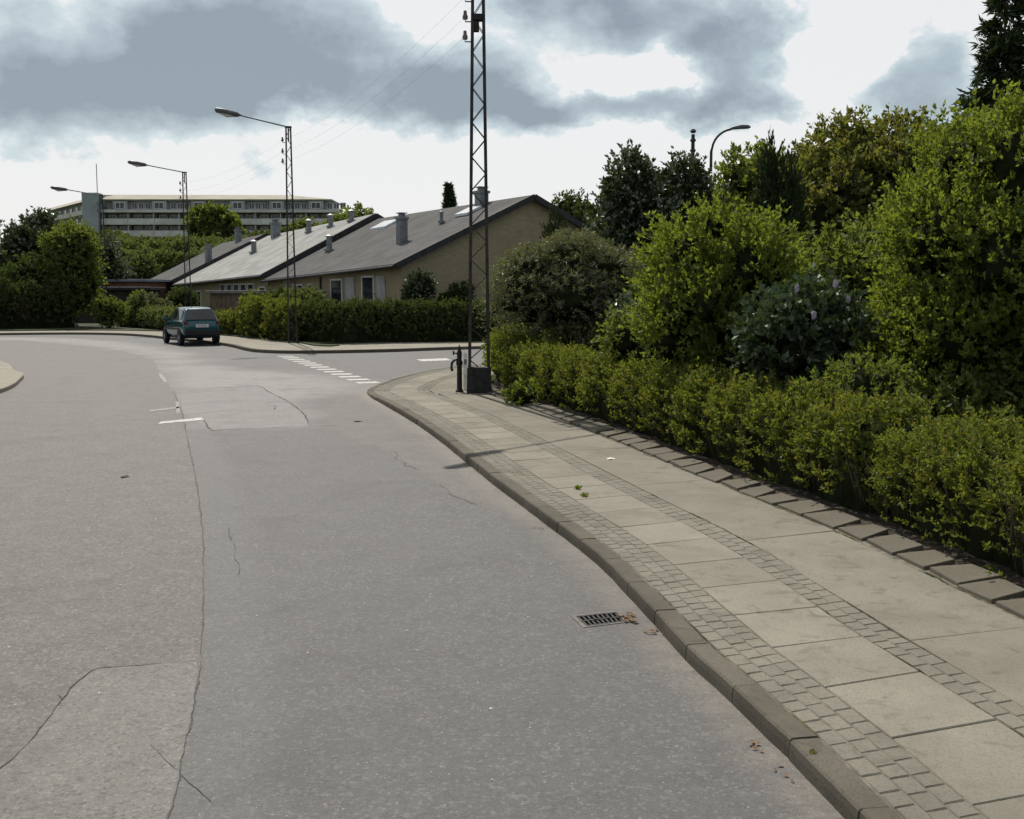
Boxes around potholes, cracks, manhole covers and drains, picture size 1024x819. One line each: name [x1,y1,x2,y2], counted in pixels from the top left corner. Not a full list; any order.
drain grate [571,611,629,628]
